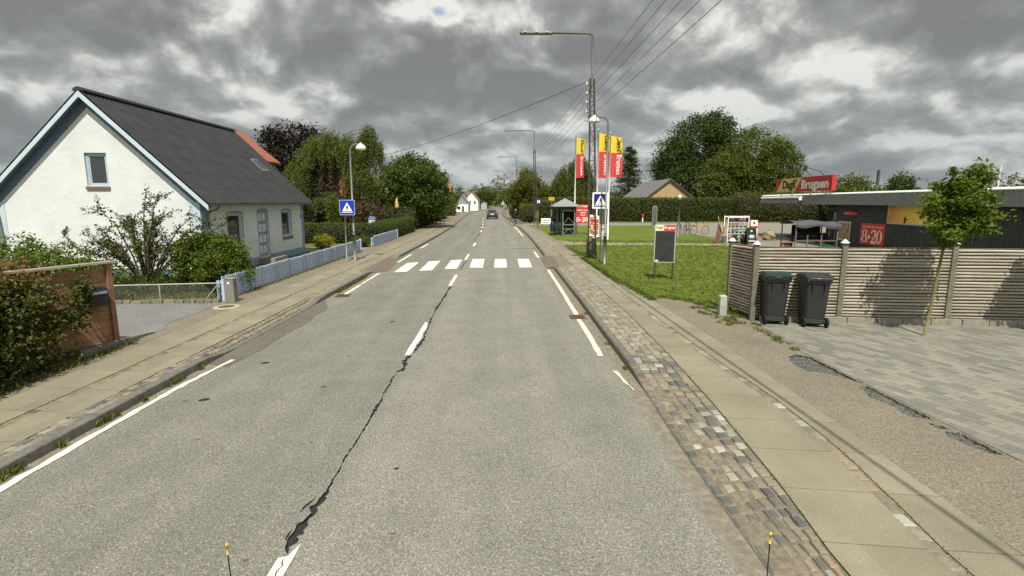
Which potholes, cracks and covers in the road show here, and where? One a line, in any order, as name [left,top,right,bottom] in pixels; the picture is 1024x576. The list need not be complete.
pothole [789,354,865,385]
pothole [945,431,1002,455]
crack [414,260,468,353]
pothole [858,386,932,420]
